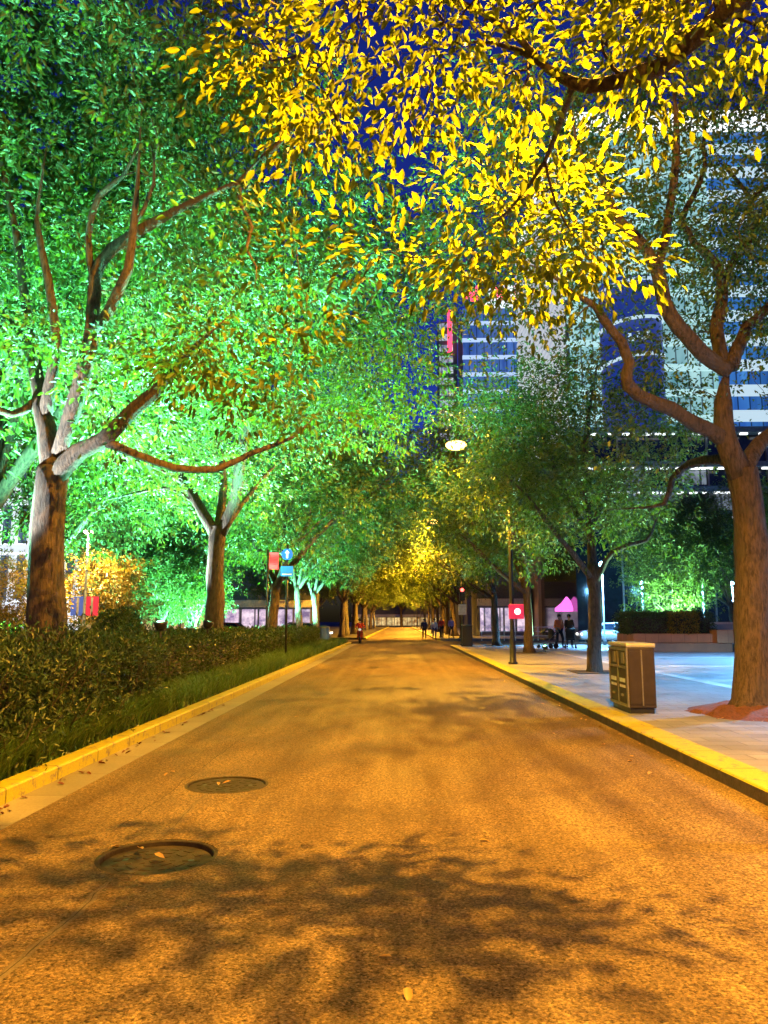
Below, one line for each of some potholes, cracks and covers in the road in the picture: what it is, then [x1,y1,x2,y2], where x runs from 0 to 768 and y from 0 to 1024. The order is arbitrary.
manhole cover [94,840,218,875]
manhole cover [184,776,269,794]
